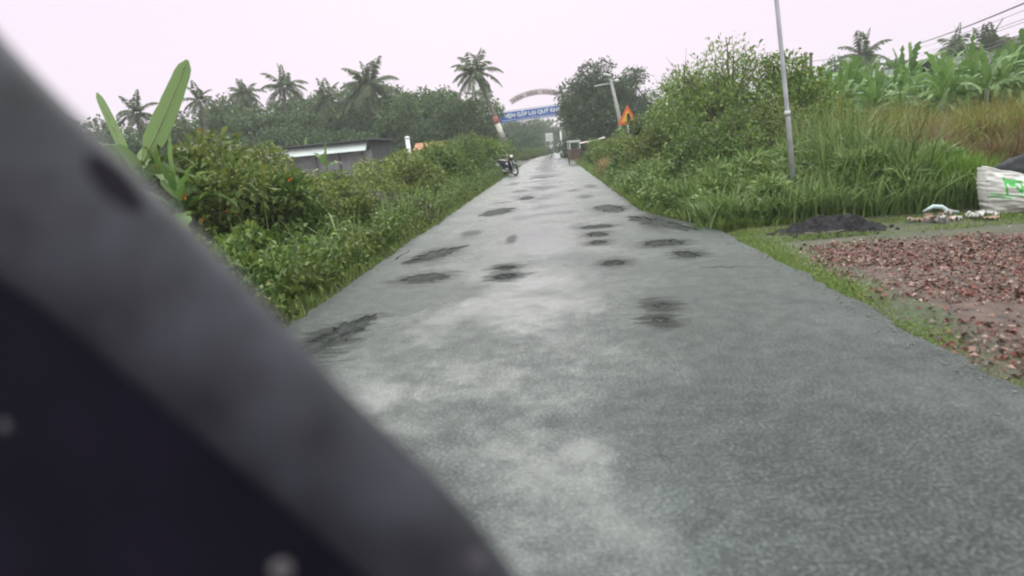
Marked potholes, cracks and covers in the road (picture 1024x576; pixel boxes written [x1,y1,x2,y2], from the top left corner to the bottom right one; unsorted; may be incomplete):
pothole [303,314,378,354]
pothole [592,205,624,213]
pothole [643,239,685,247]
pothole [402,244,470,265]
pothole [399,273,451,283]
pothole [628,215,697,232]
pothole [478,208,515,217]
